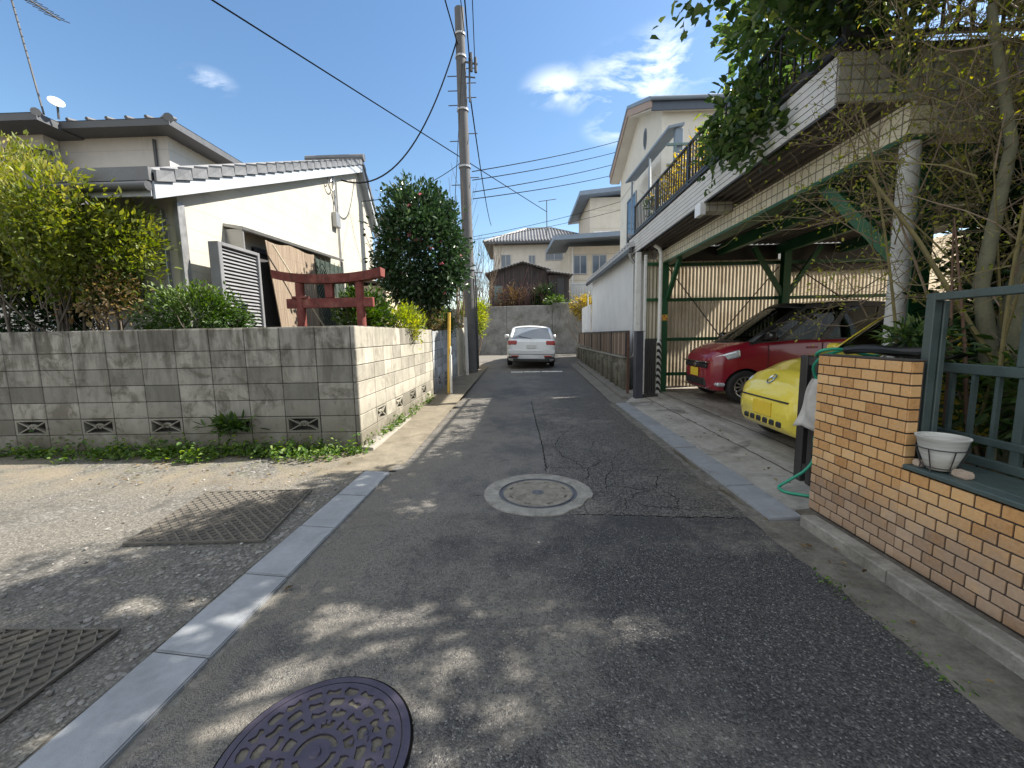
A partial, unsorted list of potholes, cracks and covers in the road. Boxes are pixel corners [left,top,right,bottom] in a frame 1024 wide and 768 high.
crack [543,430,692,510]
manhole cover [213,676,414,768]
manhole cover [484,474,593,517]
